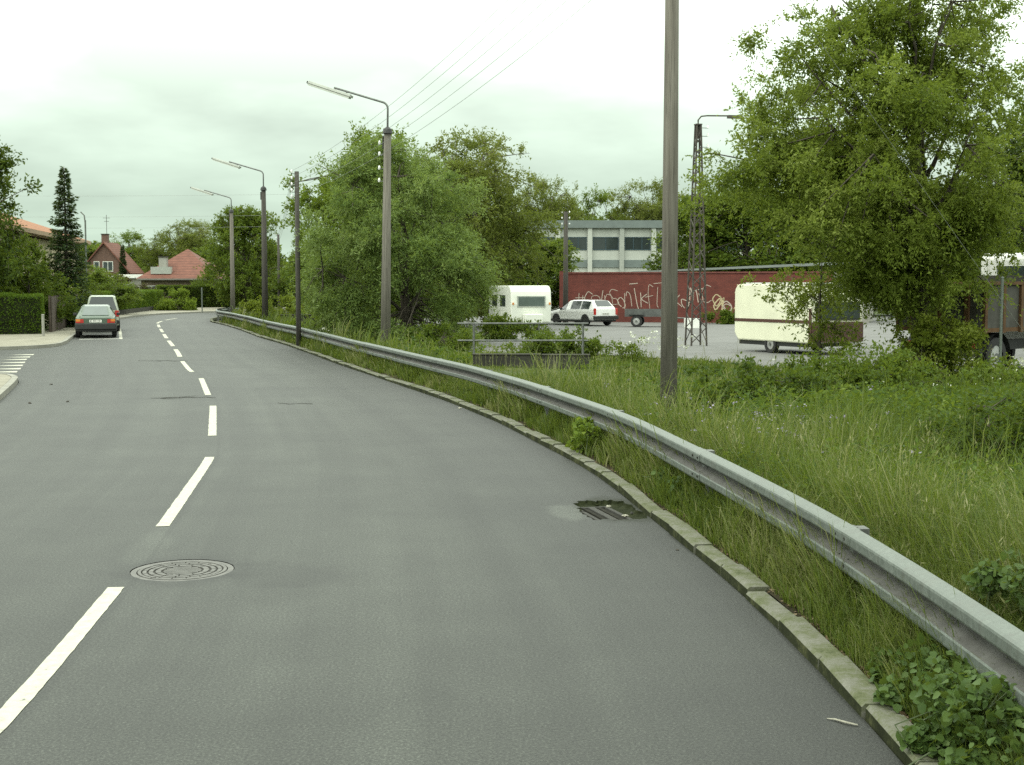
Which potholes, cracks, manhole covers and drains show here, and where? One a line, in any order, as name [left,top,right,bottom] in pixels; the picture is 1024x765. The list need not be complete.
manhole cover [130,560,235,581]
drain grate [580,506,632,521]
